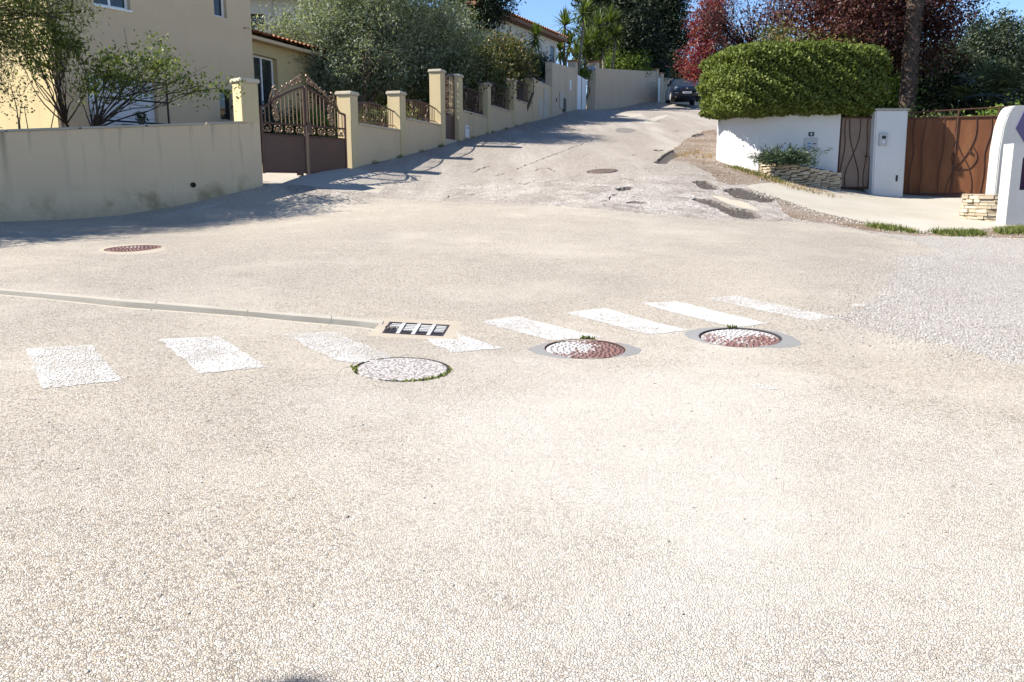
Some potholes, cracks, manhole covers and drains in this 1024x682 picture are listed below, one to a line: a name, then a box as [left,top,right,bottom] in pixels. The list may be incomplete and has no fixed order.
manhole cover [354,357,451,382]
pothole [654,150,679,164]
manhole cover [98,244,167,254]
manhole cover [528,339,641,359]
crack [475,139,593,185]
pothole [692,198,763,219]
manhole cover [684,327,802,348]
pothole [692,181,720,190]
pothole [723,188,776,203]
drain grate [367,318,462,340]
